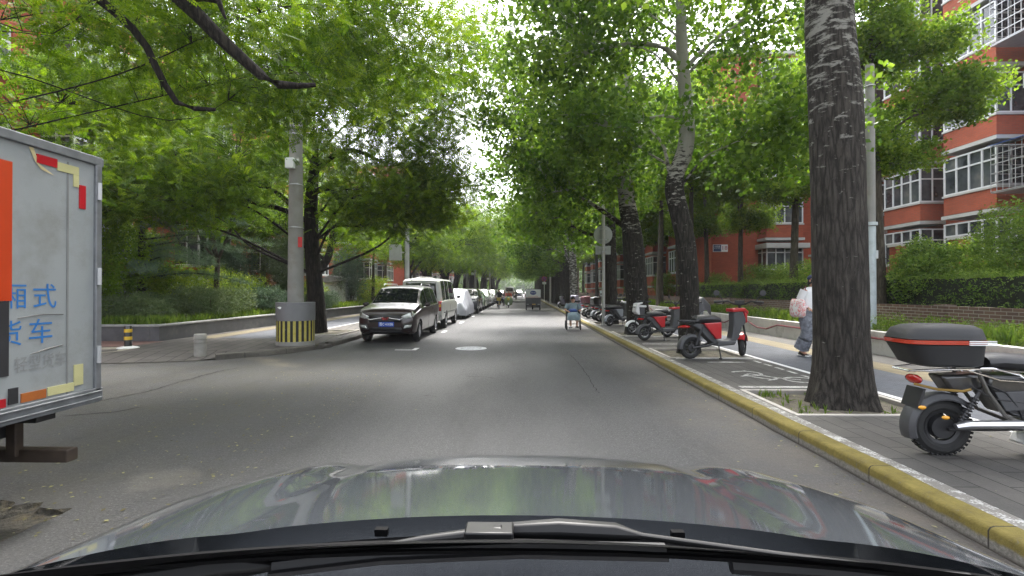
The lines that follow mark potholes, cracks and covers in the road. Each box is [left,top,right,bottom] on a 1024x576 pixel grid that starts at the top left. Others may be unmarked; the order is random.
pothole [0,500,72,542]
